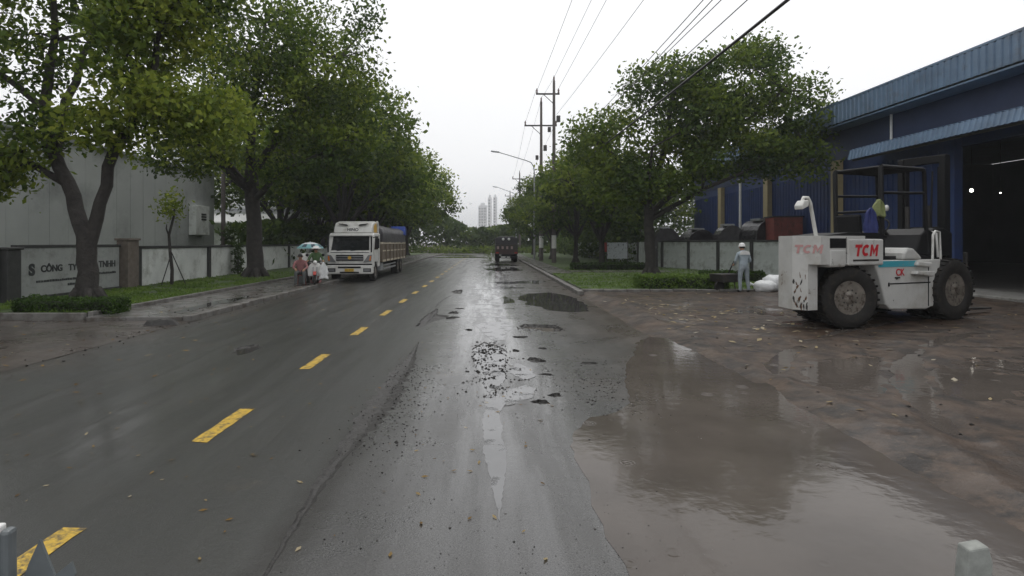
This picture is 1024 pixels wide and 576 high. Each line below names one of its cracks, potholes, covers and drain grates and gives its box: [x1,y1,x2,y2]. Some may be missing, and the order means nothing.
pothole [521,324,563,332]
pothole [472,342,507,393]
